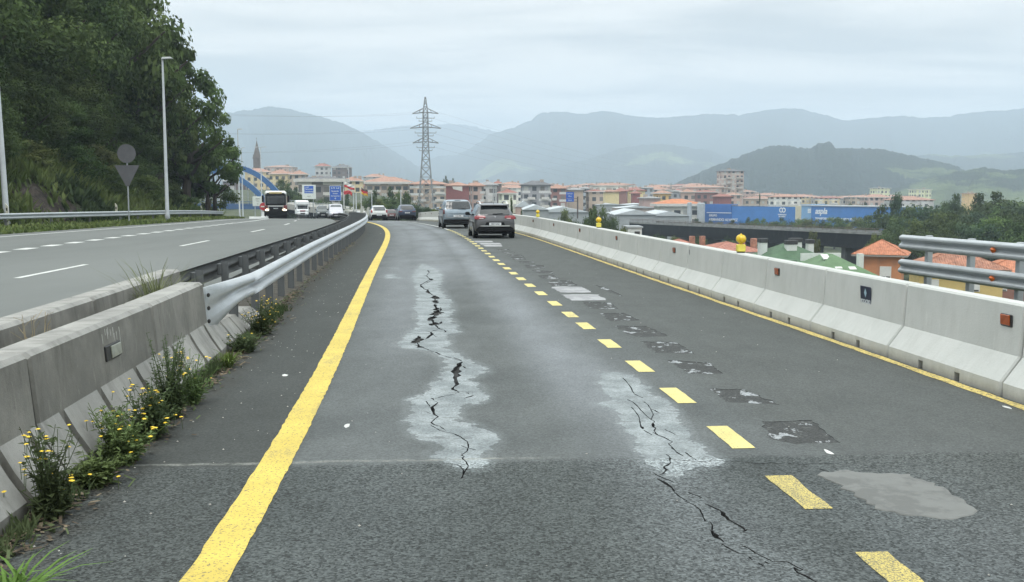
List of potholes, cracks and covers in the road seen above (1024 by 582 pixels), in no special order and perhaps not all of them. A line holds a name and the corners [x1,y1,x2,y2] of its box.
crack [417,270,476,478]
crack [623,378,826,582]
